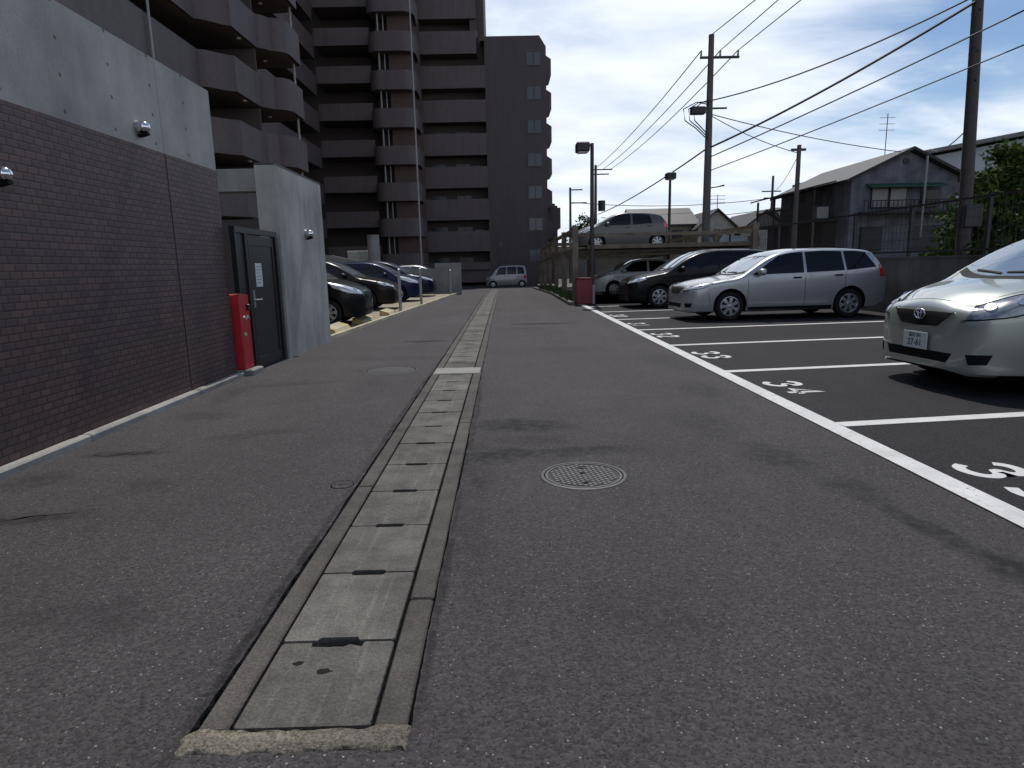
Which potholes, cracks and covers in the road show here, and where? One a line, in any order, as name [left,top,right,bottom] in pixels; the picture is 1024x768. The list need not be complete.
manhole cover [328,480,357,490]
manhole cover [540,462,627,490]
manhole cover [364,366,418,375]
